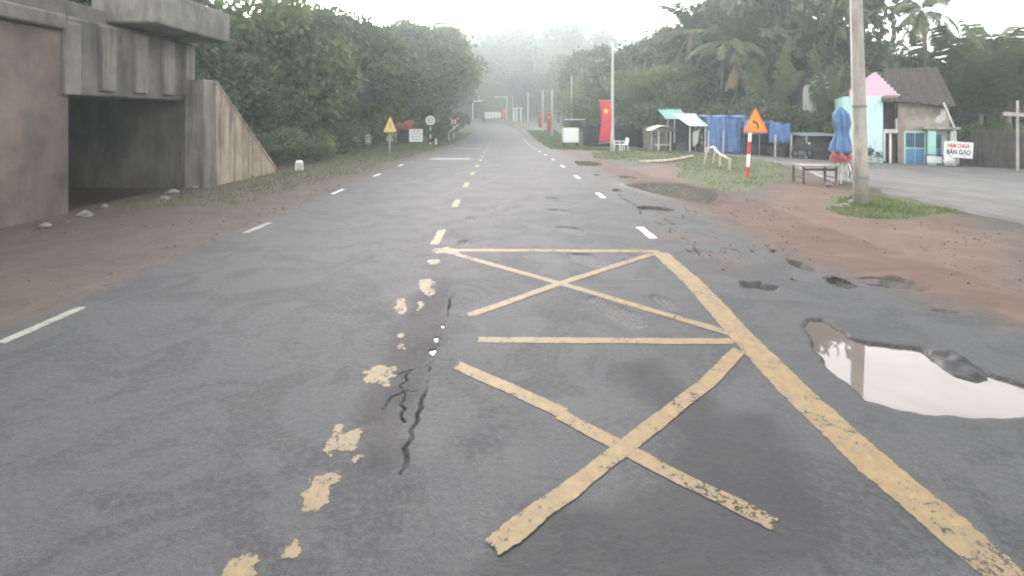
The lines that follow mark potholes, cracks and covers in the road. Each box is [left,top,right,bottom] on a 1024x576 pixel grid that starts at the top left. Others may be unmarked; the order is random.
pothole [638,291,692,314]
pothole [574,292,657,335]
pothole [727,277,791,294]
pothole [630,205,682,213]
crack [363,287,466,492]
pothole [785,313,1024,431]
pothole [548,225,593,237]
crack [606,191,714,282]
pothole [811,273,874,294]
pothole [543,208,576,216]
pothole [776,257,827,275]
pothole [449,238,478,249]
